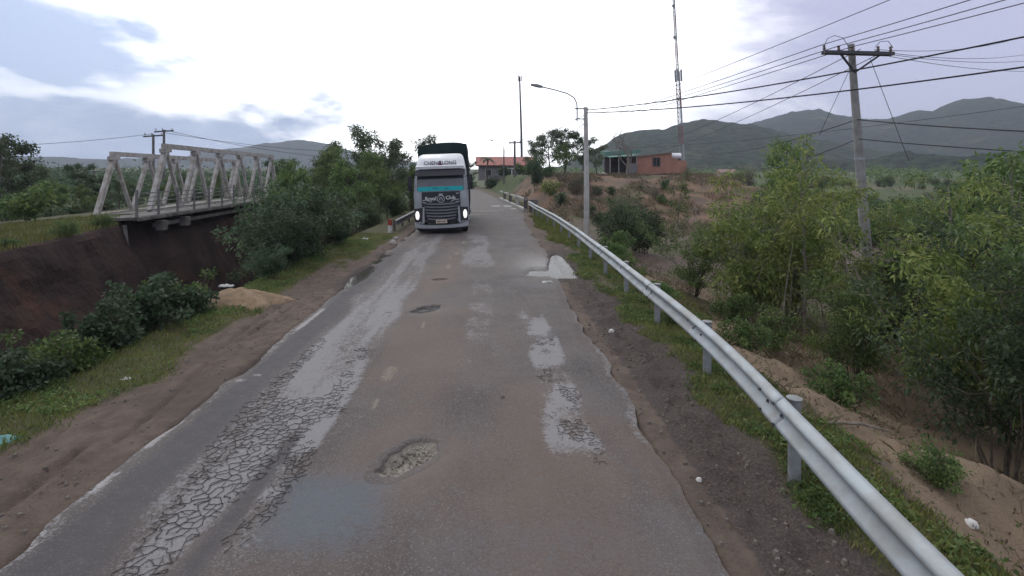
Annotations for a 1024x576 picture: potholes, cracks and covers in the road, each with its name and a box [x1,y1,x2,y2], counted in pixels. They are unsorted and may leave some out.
pothole [404,303,446,315]
crack [111,312,389,576]
crack [533,340,607,464]
pothole [363,432,449,485]
